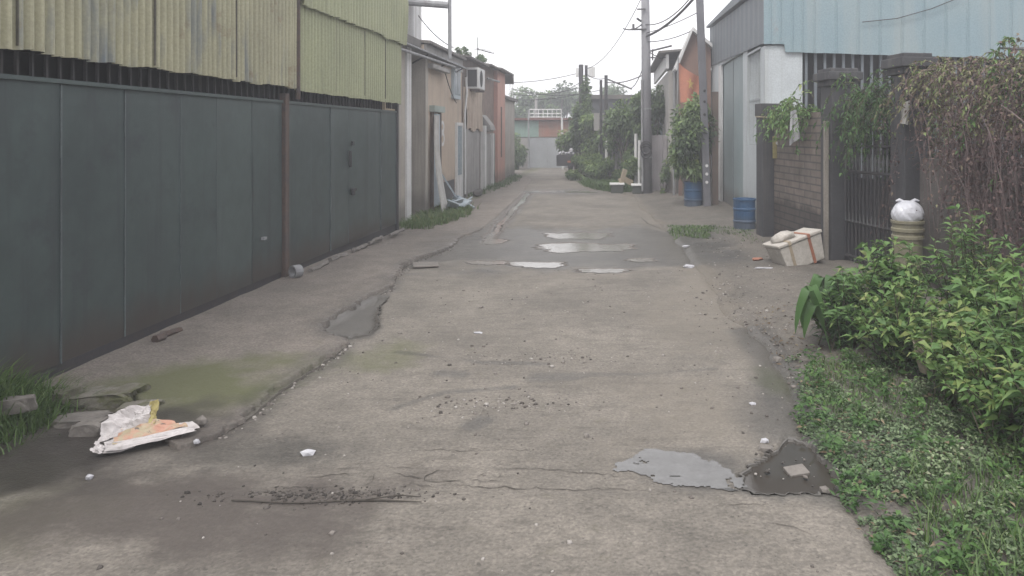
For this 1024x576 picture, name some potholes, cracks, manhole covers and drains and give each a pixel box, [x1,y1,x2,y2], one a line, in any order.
pothole [543,232,614,240]
pothole [323,295,389,339]
crack [214,249,449,440]
crack [274,447,635,491]
pothole [738,437,845,497]
crack [480,193,533,239]
pothole [533,242,640,253]
